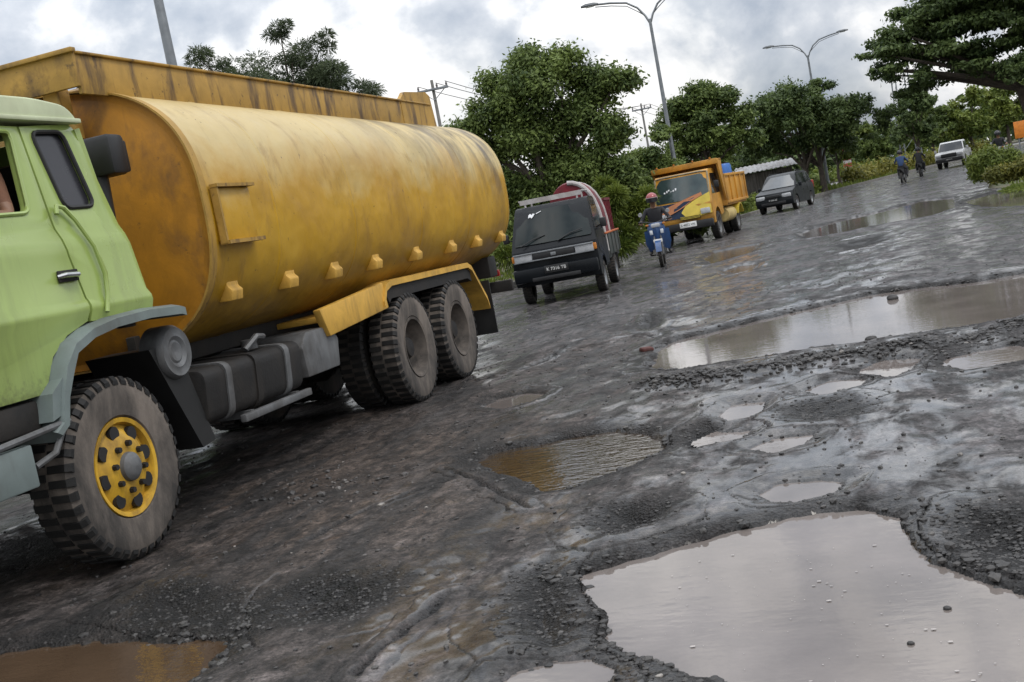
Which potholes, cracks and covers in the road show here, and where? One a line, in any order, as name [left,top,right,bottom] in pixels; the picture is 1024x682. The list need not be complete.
pothole [723,425,838,457]
pothole [461,648,648,682]
pothole [778,372,879,396]
crack [330,584,475,682]
pothole [783,195,966,240]
pothole [660,418,752,456]
pothole [0,621,257,682]
pothole [691,420,768,447]
pothole [617,265,1024,375]
pothole [578,480,1024,682]
pothole [727,466,874,509]
